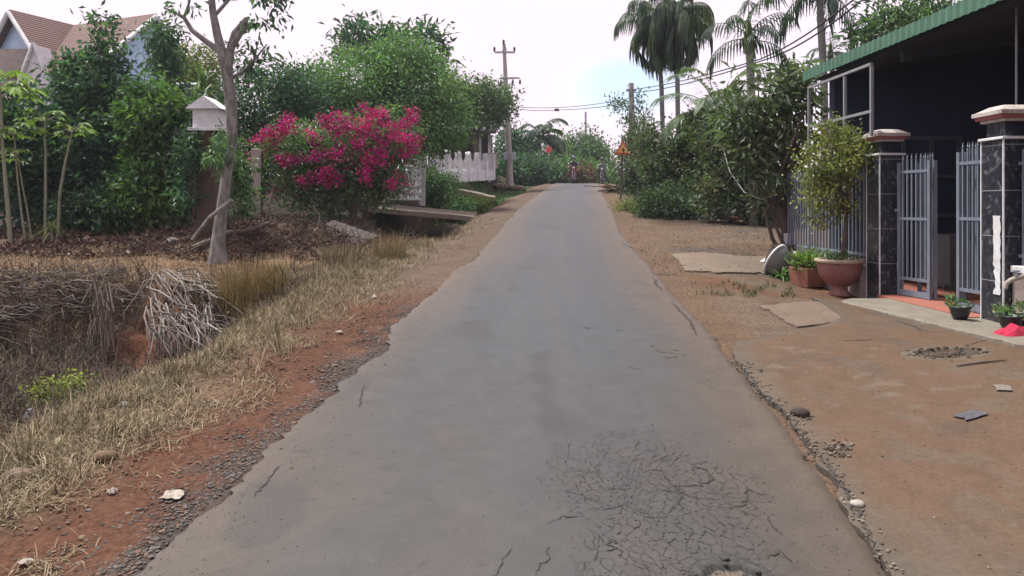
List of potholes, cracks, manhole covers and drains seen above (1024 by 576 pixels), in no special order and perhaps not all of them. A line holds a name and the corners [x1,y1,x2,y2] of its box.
pothole [684,554,777,576]
crack [536,428,792,576]
pothole [901,346,994,360]
crack [653,272,698,358]
crack [254,465,280,497]
